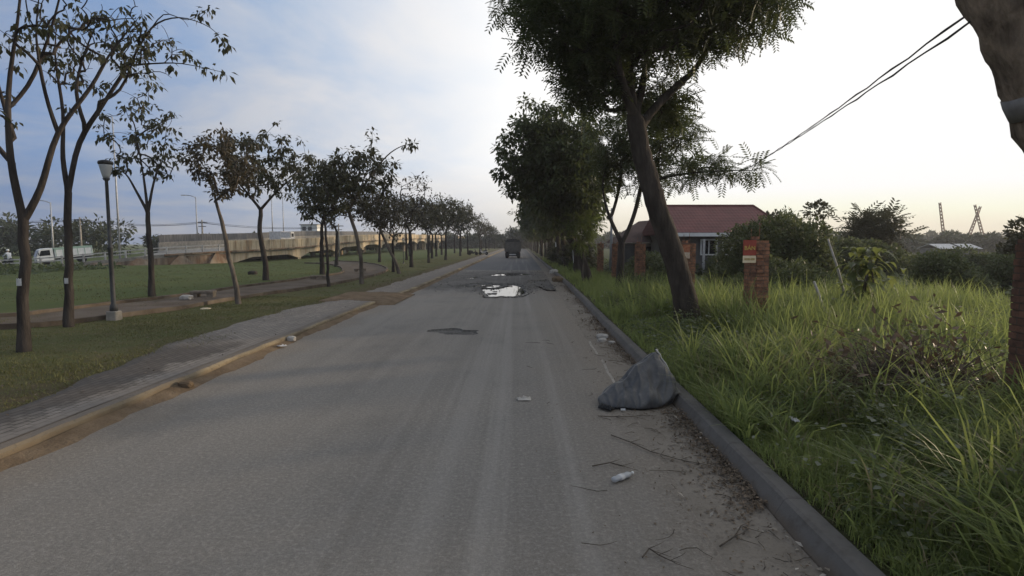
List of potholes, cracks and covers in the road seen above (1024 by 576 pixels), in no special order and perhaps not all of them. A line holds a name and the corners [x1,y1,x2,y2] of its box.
pothole [476,284,532,298]
pothole [525,280,555,290]
pothole [415,327,489,337]
